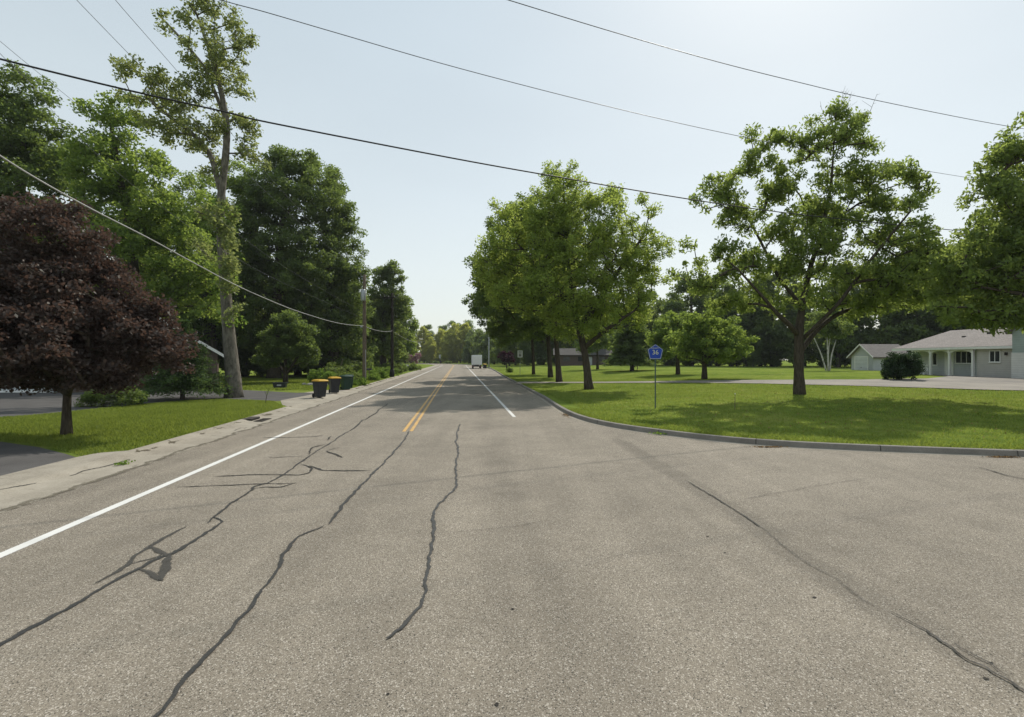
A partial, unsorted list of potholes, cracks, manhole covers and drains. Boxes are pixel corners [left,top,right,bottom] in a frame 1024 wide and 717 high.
crack [181,404,387,489]
